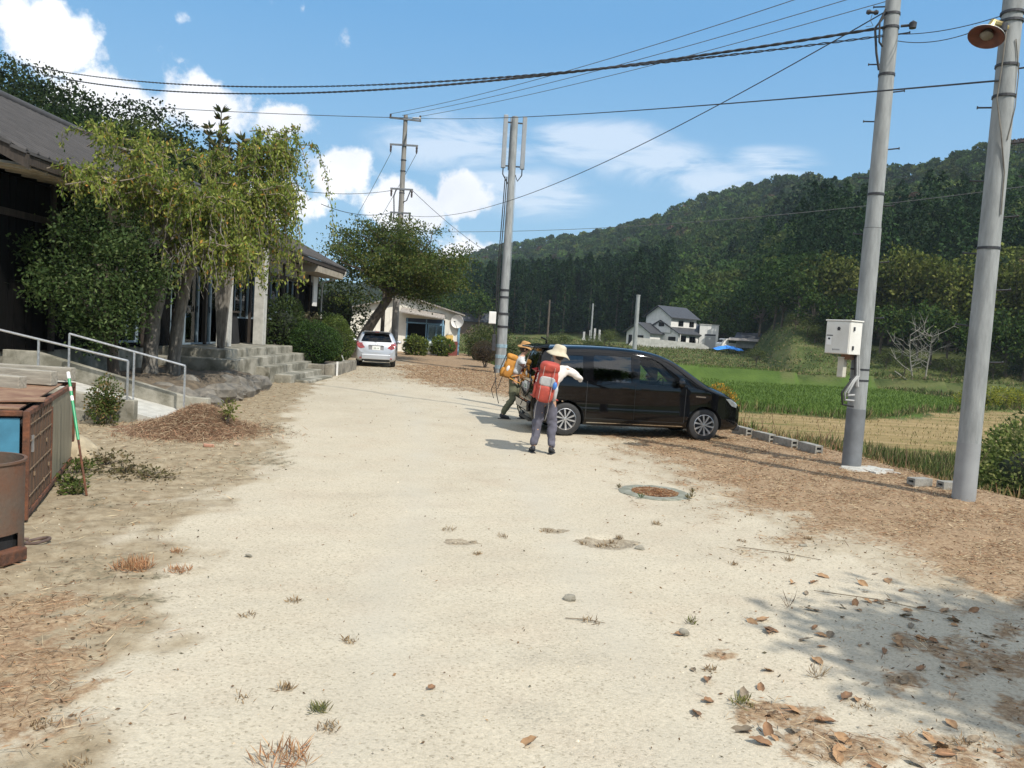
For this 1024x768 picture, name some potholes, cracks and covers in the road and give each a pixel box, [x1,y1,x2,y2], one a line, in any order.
pothole [573,537,642,550]
manhole cover [618,485,691,501]
